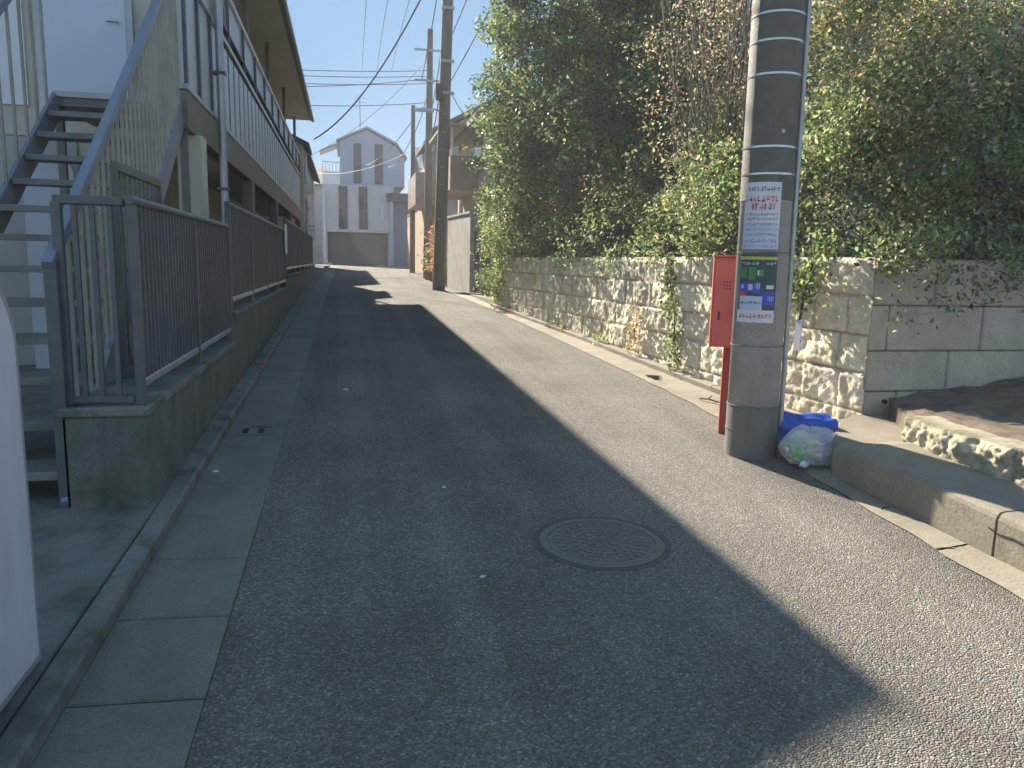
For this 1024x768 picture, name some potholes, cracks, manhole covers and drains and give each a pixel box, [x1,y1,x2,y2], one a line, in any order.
manhole cover [533,516,672,571]
